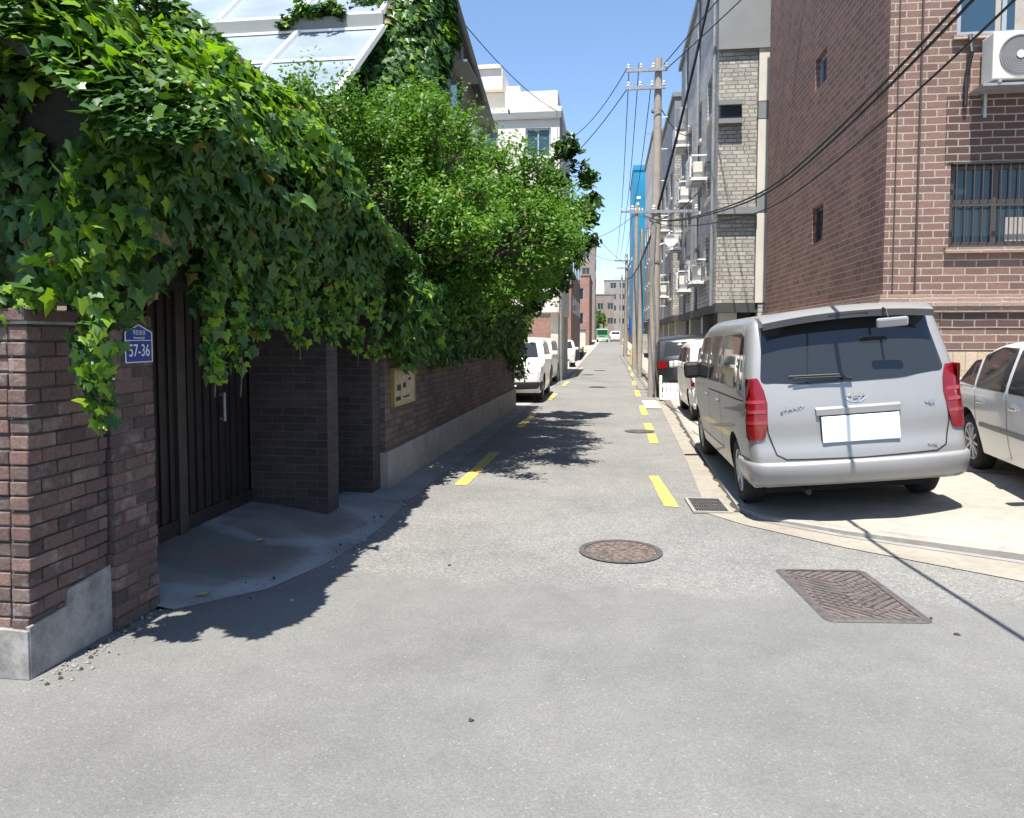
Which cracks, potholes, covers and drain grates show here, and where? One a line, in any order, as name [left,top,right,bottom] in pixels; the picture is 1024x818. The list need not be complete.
manhole cover [776,569,932,623]
manhole cover [579,539,663,563]
drain grate [684,497,733,514]
